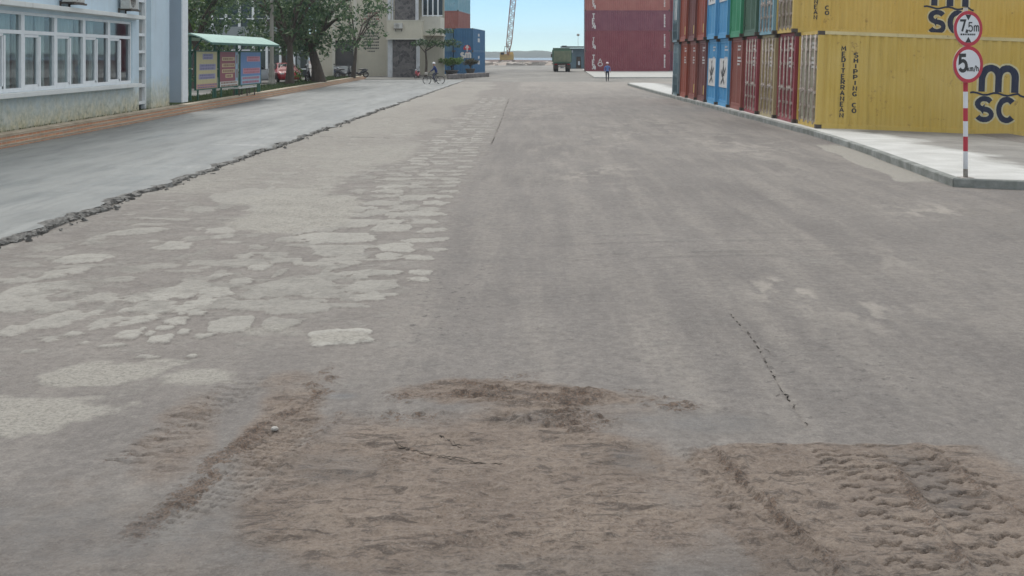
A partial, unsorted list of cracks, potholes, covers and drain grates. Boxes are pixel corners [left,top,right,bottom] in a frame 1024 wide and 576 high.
crack [731,314,807,424]
crack [394,435,503,464]
